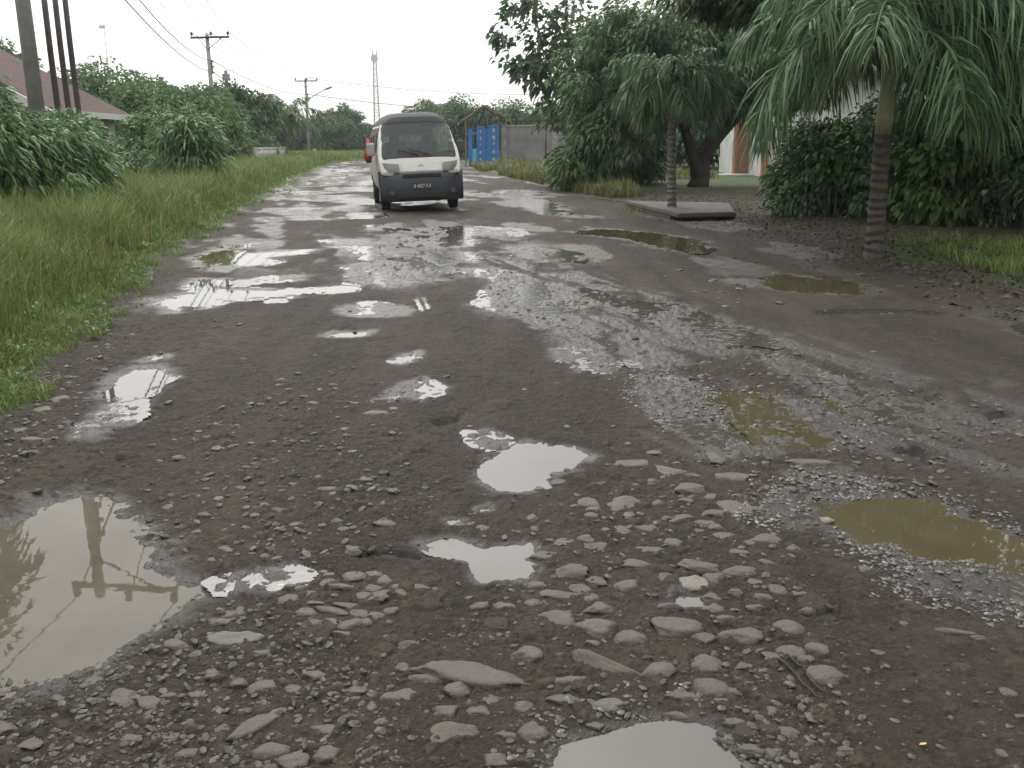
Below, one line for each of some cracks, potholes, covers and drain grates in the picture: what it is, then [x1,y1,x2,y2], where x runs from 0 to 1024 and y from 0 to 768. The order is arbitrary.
pothole [302,285,362,295]
pothole [413,533,548,586]
pothole [705,389,876,451]
pothole [376,376,452,403]
pothole [469,438,604,495]
pothole [229,272,315,288]
pothole [564,228,723,255]
pothole [138,286,306,314]
pothole [757,274,883,297]
pothole [330,300,418,319]
pothole [175,276,236,290]
pothole [814,489,1024,576]
